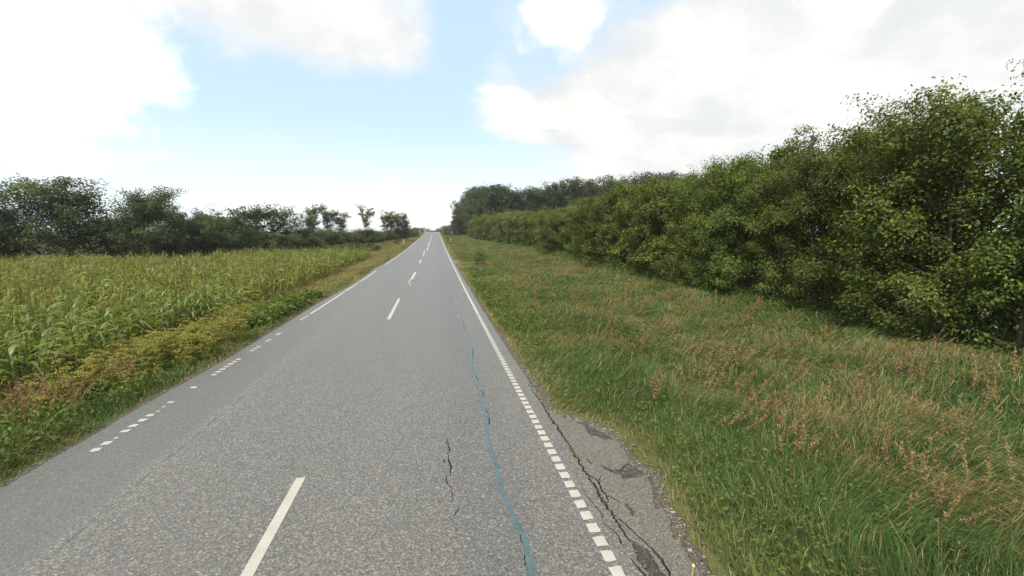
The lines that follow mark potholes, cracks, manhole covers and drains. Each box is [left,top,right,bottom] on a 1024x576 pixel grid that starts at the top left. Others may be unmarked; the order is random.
pothole [601,463,647,479]
crack [441,437,460,520]
crack [528,384,671,576]
pothole [575,420,611,440]
pothole [632,542,666,576]
